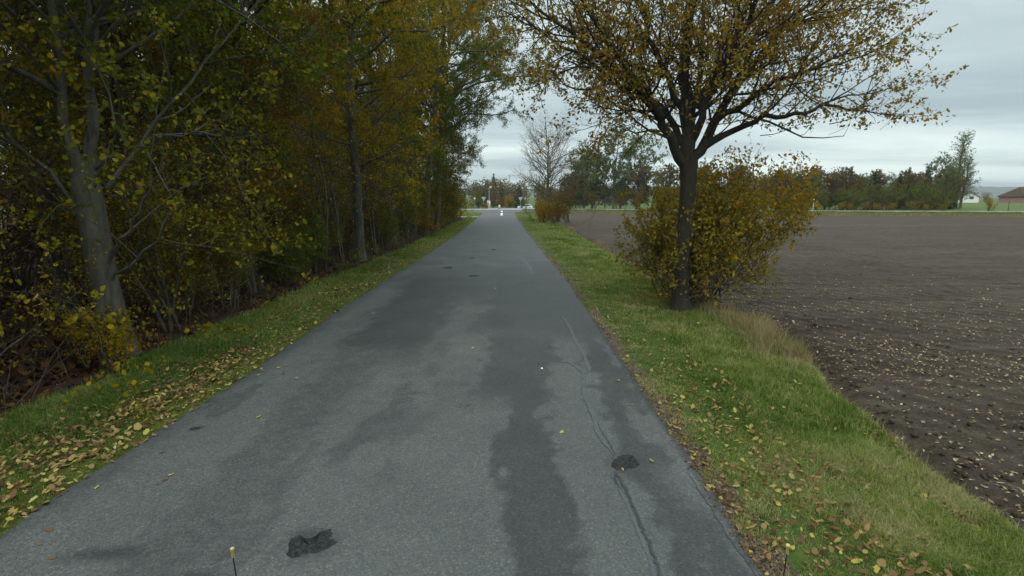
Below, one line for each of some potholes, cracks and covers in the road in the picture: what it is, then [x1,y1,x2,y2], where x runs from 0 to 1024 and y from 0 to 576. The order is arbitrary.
crack [558,316,661,576]
pothole [611,454,640,471]
pothole [286,529,338,559]
